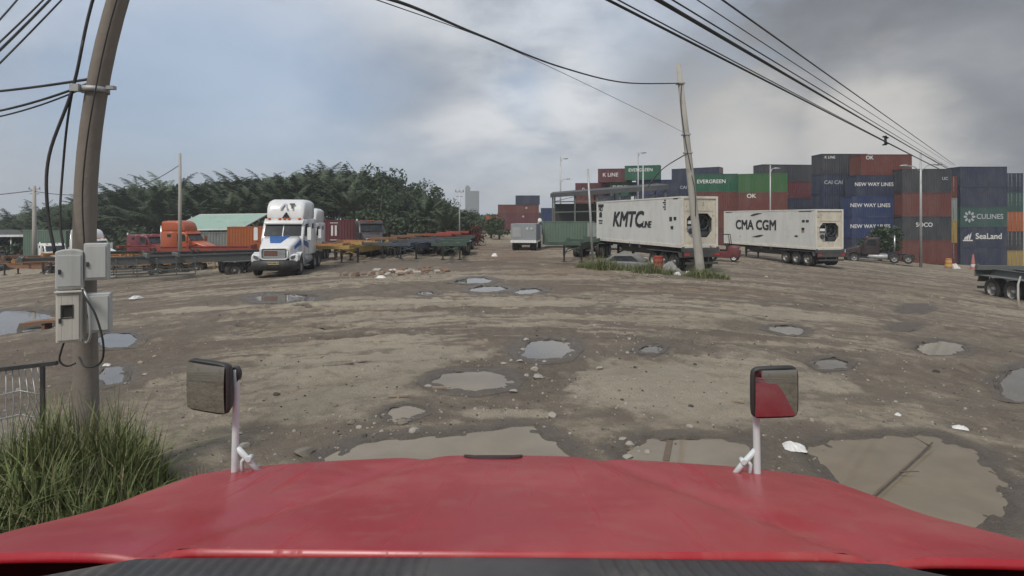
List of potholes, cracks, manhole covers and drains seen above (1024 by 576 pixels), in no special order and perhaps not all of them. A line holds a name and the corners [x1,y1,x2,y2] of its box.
pothole [804,355,858,372]
pothole [278,416,608,464]
pothole [631,343,670,355]
pothole [509,334,585,364]
pothole [416,367,529,397]
pothole [443,275,501,285]
pothole [772,424,1024,541]
pothole [900,337,979,358]
pothole [0,305,56,335]
pothole [377,403,432,422]
pothole [99,361,133,389]
pothole [98,330,151,351]
